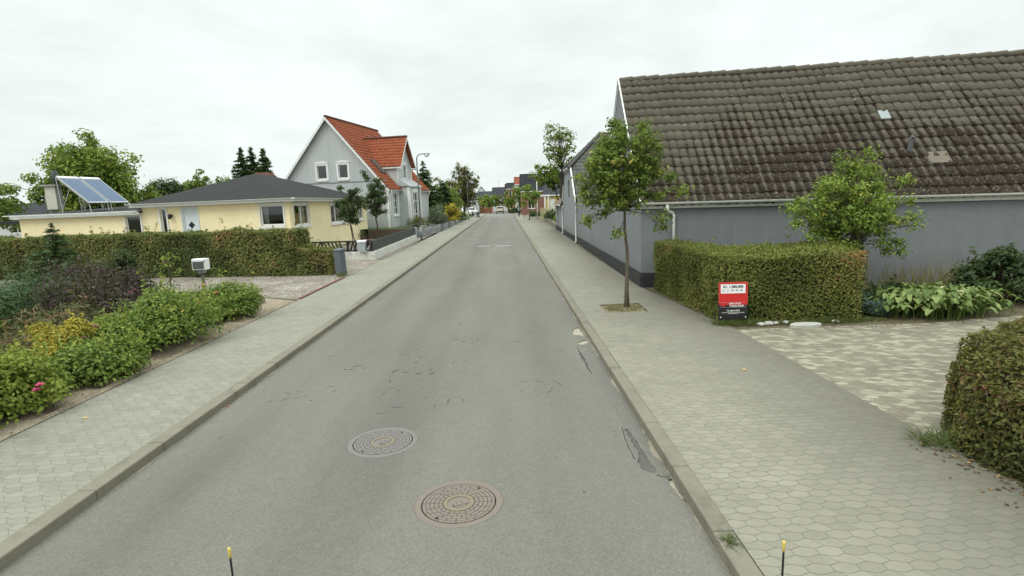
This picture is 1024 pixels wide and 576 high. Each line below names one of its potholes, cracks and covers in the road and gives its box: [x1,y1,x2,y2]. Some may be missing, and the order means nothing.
crack [376,349,466,414]
crack [520,345,669,477]
pothole [625,429,656,473]
manhole cover [347,428,418,458]
manhole cover [414,481,503,528]
